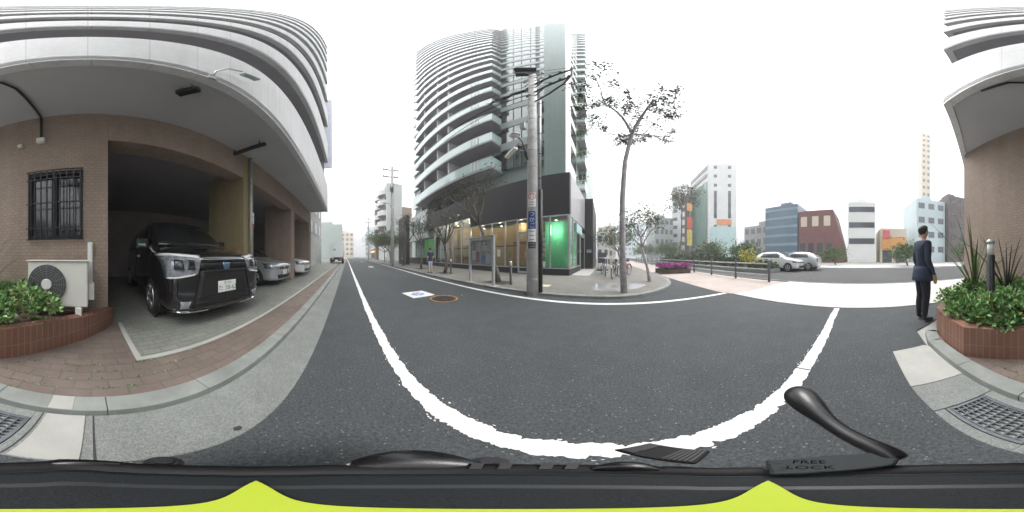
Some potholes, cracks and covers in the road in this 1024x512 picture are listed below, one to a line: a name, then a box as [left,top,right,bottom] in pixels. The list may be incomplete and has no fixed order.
manhole cover [428,295,459,303]
